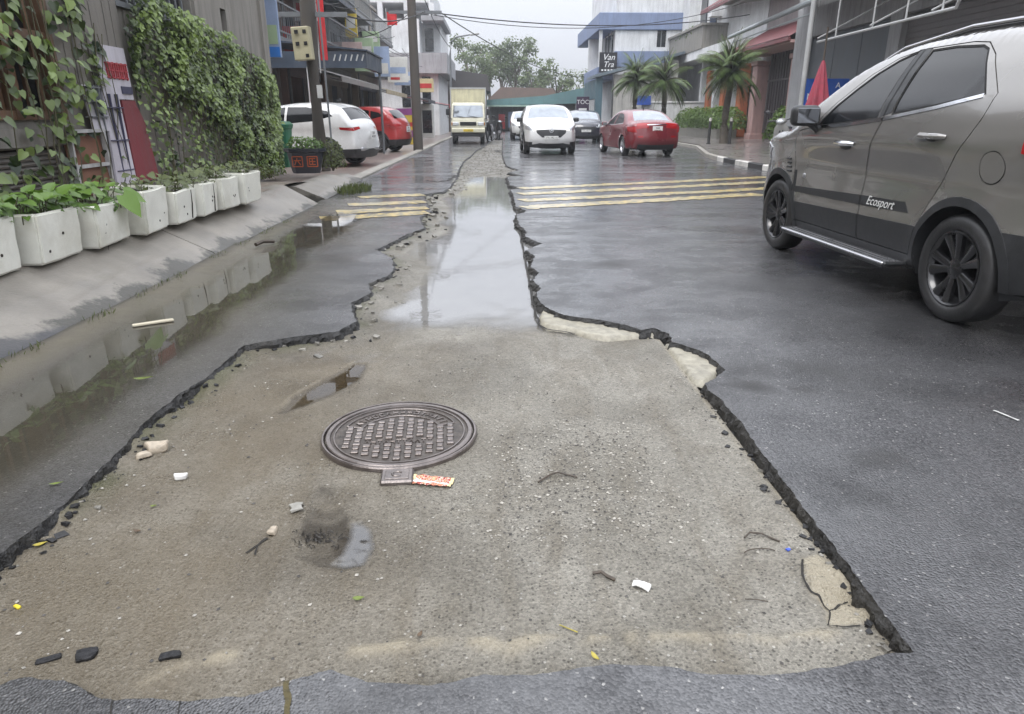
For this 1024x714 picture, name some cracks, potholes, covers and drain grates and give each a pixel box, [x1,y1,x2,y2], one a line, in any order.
manhole cover [321,401,477,486]
crack [801,559,861,627]
pothole [0,138,913,701]
